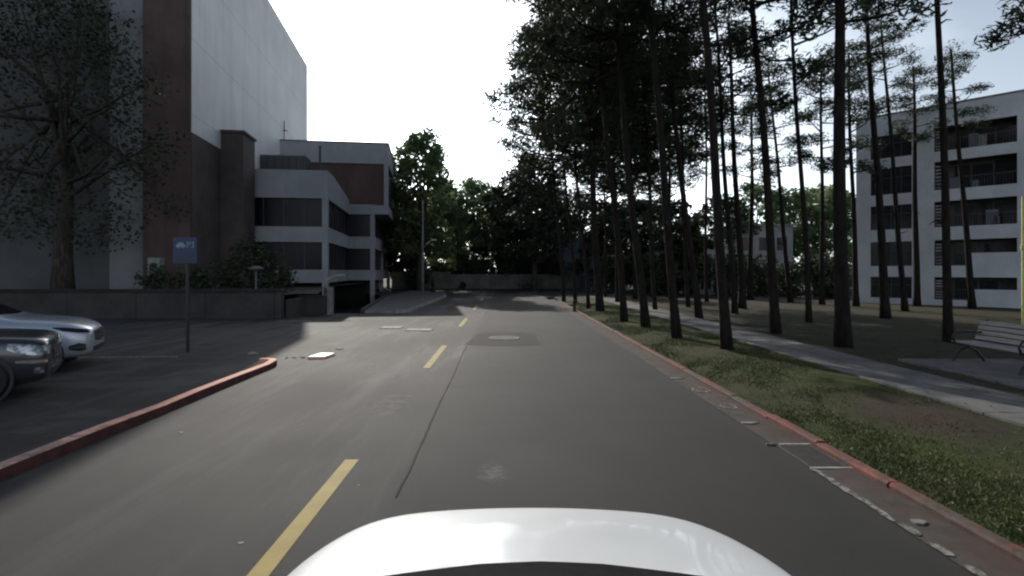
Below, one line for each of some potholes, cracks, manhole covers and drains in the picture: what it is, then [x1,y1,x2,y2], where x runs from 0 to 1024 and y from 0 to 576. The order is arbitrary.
drain grate [776,443,852,475]
